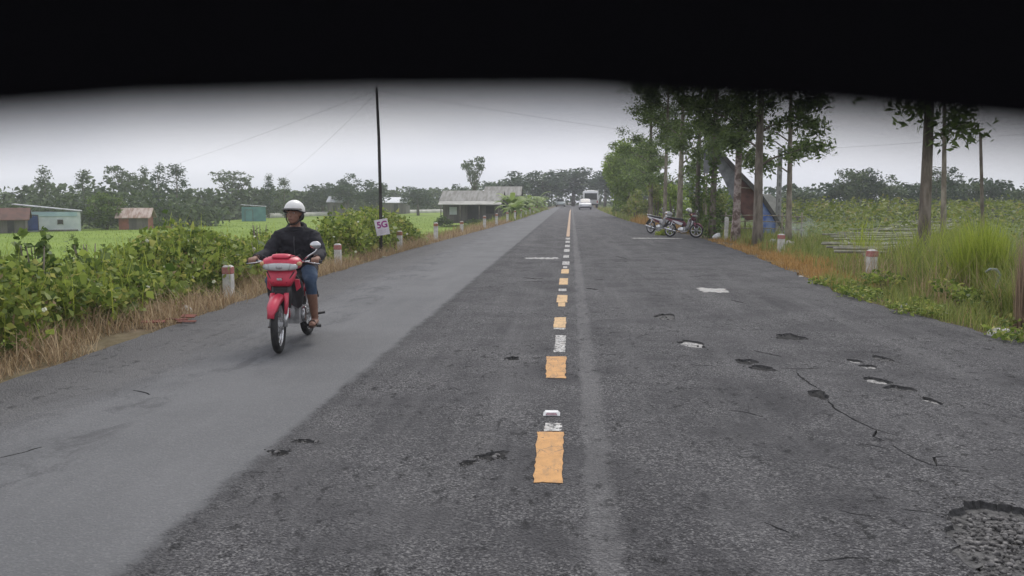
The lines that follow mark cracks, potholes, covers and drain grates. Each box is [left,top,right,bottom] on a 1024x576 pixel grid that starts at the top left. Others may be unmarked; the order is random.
pothole [742,364,778,372]
pothole [771,333,808,342]
pothole [863,375,894,385]
pothole [904,483,1024,576]
pothole [882,384,920,392]
pothole [653,313,680,322]
pothole [806,389,829,403]
crack [707,351,967,468]
pothole [473,449,510,462]
pothole [673,338,709,350]
